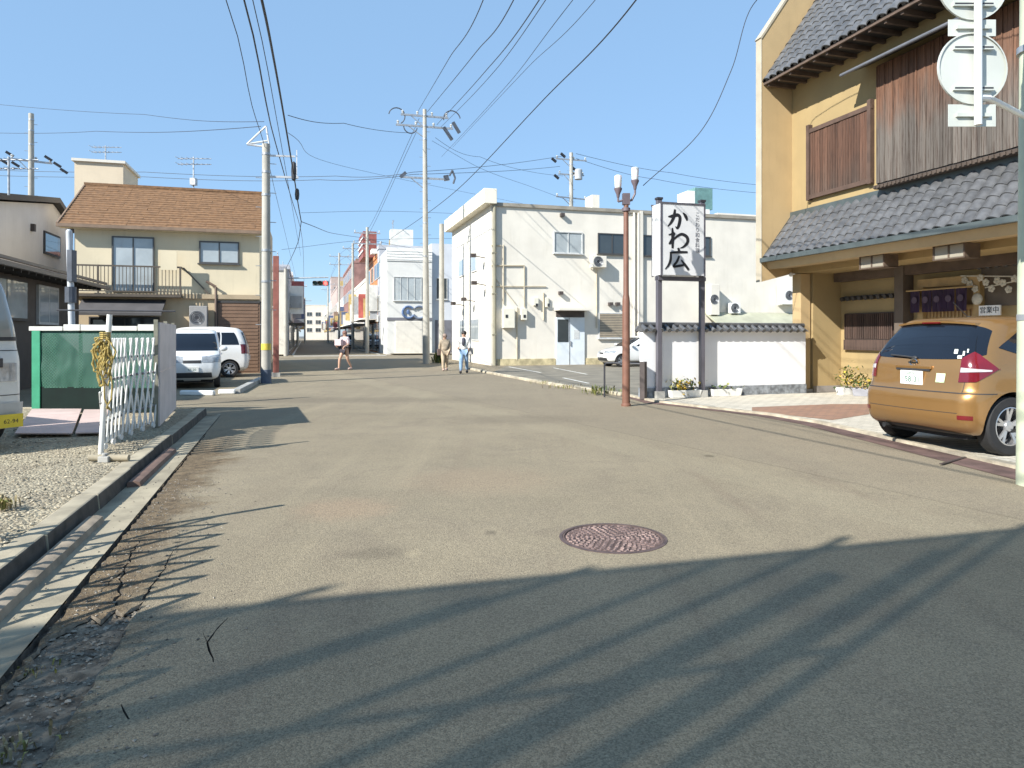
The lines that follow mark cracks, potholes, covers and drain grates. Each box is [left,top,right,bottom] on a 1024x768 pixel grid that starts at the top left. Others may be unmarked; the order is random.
manhole cover [559,523,668,554]
